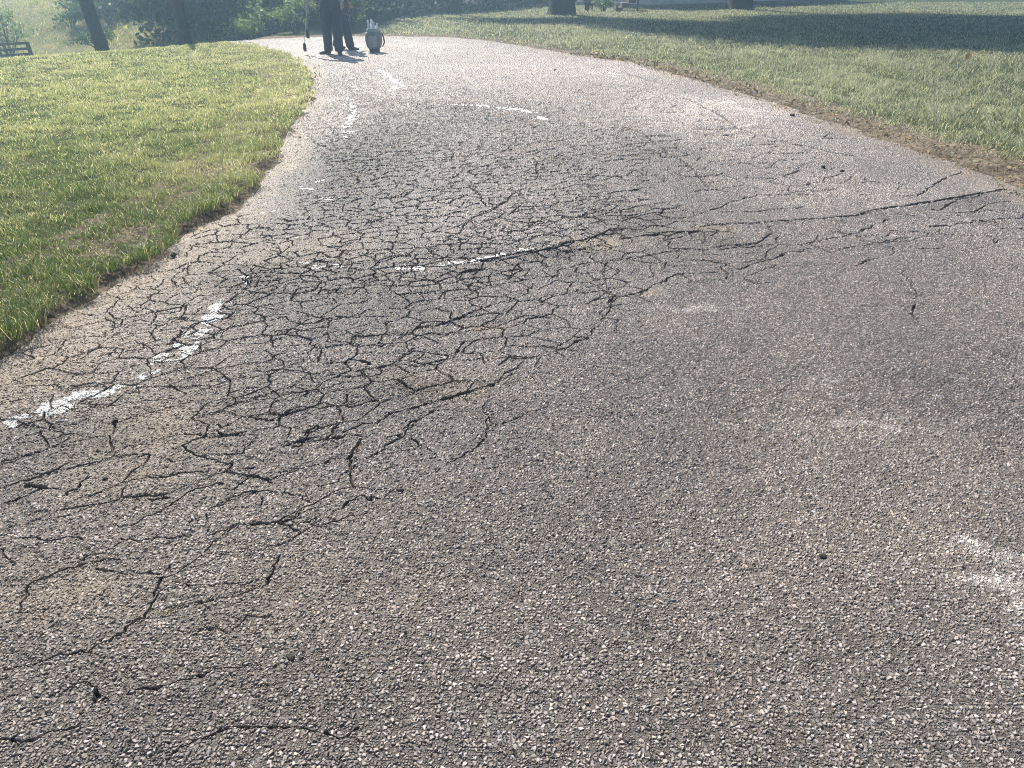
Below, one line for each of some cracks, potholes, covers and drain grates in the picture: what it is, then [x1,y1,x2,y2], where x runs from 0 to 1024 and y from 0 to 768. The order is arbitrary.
crack [0,71,1024,671]
